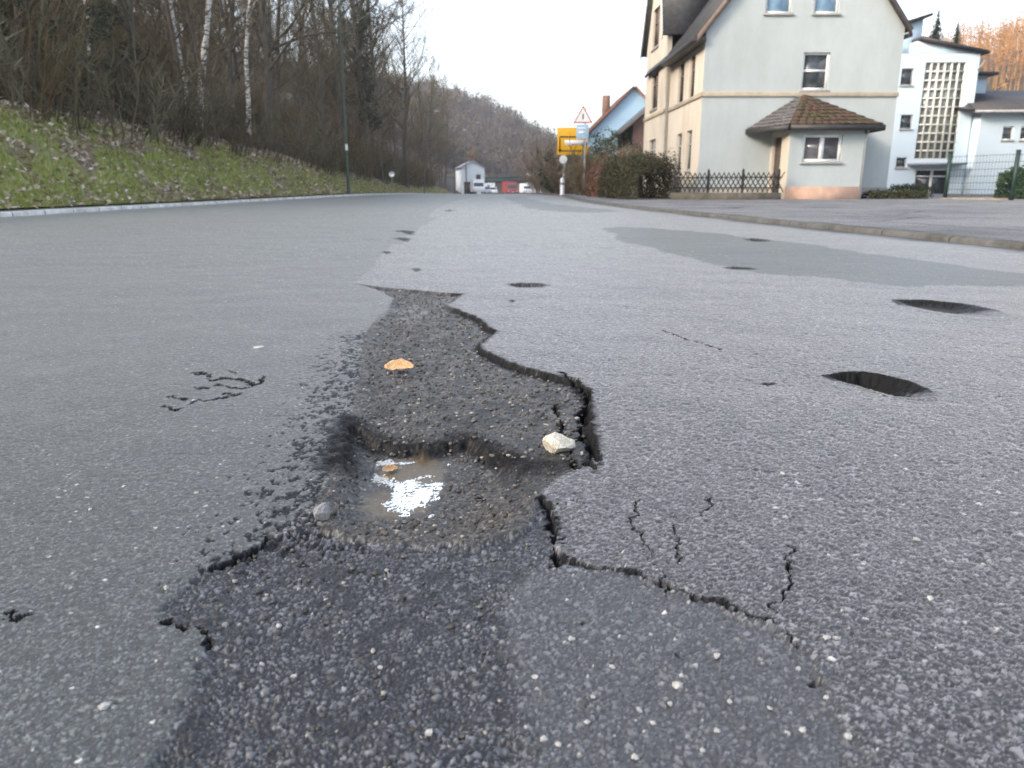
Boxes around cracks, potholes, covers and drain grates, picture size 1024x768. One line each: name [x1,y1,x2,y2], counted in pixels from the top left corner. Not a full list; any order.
pothole [312,283,600,551]
crack [662,330,722,350]
pothole [894,299,1021,322]
crack [536,493,800,651]
pothole [822,371,942,401]
